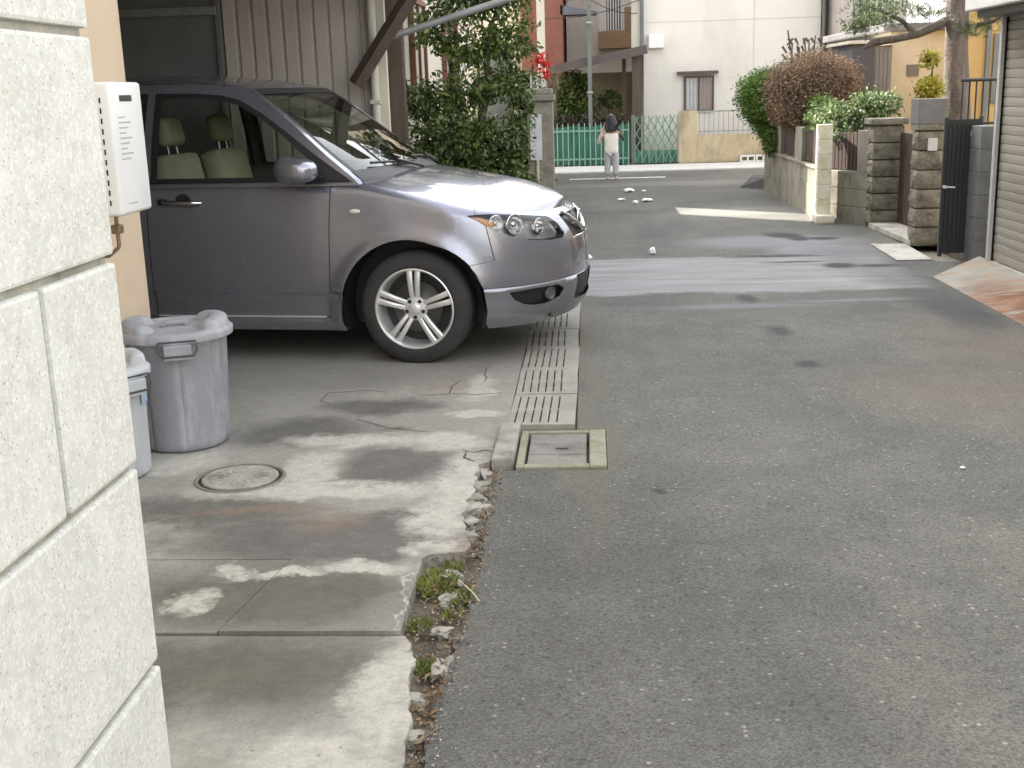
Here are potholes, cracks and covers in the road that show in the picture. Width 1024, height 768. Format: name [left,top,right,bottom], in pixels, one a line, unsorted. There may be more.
drain grate [516,368,578,398]
manhole cover [515,430,607,470]
drain grate [508,394,577,430]
drain grate [522,347,580,373]
drain grate [531,312,580,332]
drain grate [527,329,579,348]
manhole cover [193,463,287,493]
